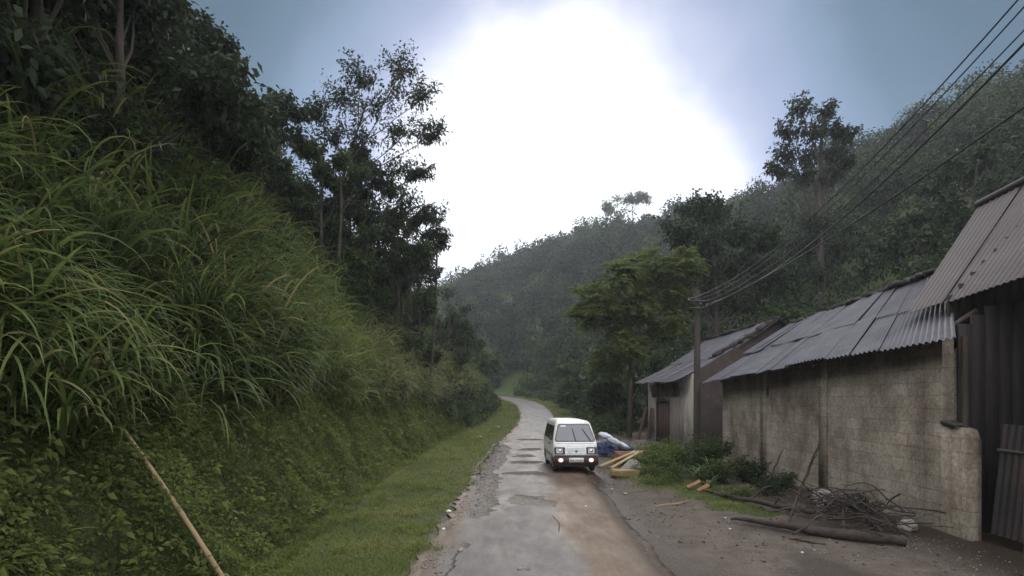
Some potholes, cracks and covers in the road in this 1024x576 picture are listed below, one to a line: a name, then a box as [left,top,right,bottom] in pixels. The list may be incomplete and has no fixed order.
pothole [458,444,513,520]
crack [443,551,460,576]
